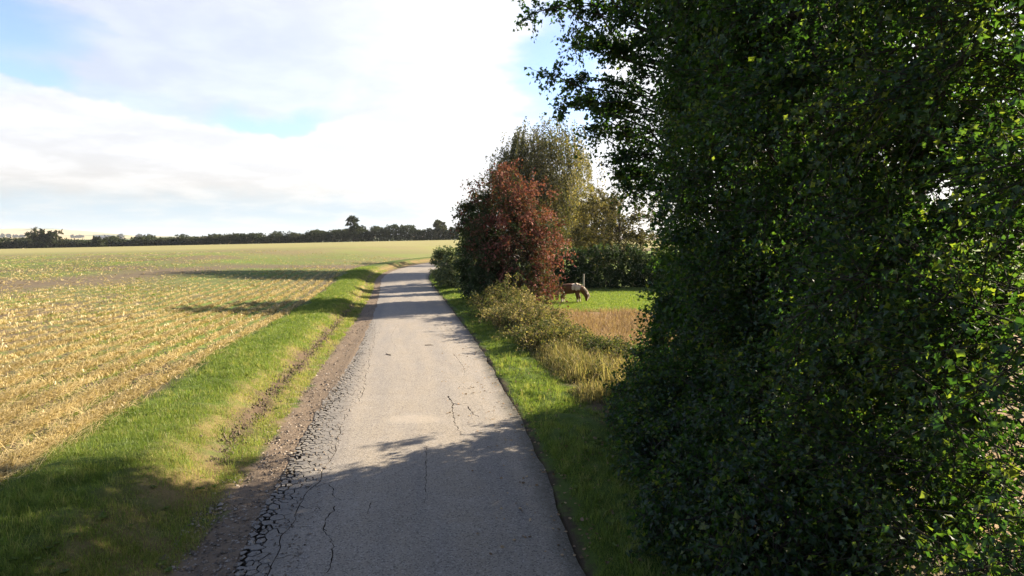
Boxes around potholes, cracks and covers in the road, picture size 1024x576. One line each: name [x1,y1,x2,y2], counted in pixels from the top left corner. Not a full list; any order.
crack [234,322,376,576]
